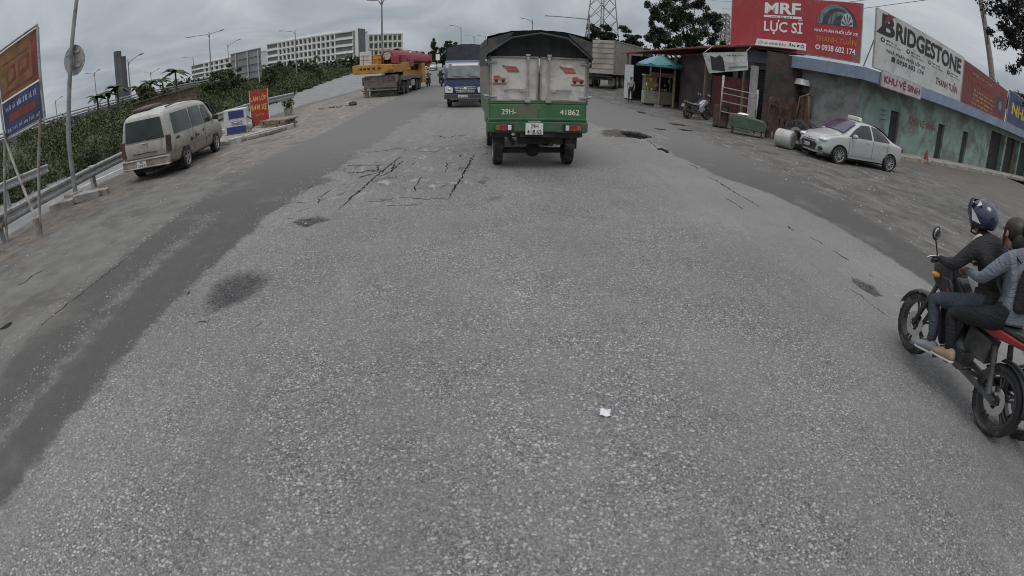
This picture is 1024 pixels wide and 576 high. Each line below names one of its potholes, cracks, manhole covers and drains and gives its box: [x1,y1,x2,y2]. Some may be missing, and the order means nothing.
crack [288,135,474,219]
pothole [851,277,884,298]
pothole [600,129,654,139]
pothole [292,216,332,227]
